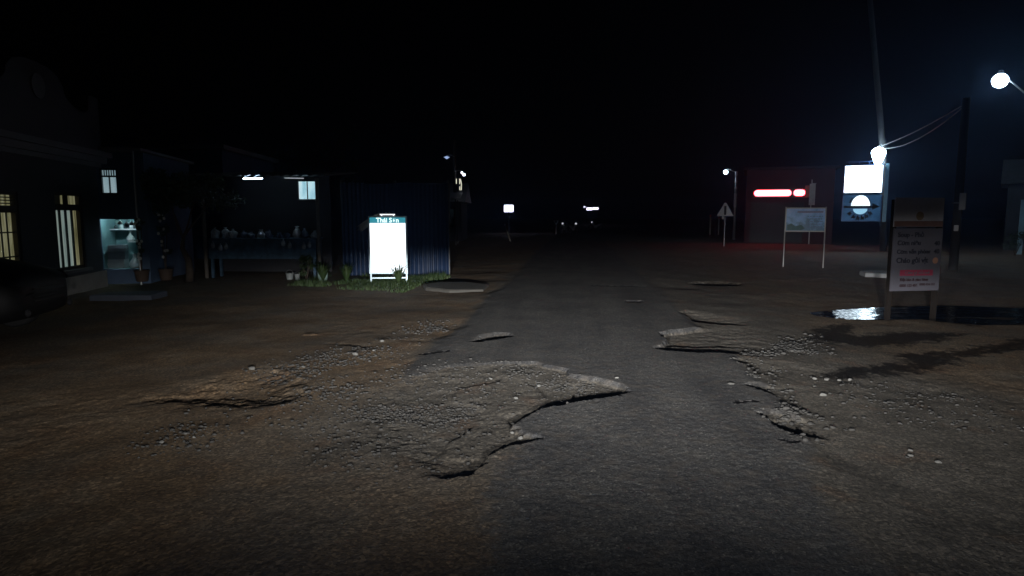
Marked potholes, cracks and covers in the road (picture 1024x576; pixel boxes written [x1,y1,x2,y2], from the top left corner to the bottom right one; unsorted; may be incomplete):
pothole [740,381,793,400]
pothole [678,309,760,326]
pothole [753,407,846,442]
pothole [115,361,334,416]
pothole [321,361,634,481]
pothole [732,357,805,378]
pothole [321,339,382,349]
pothole [651,326,825,359]
